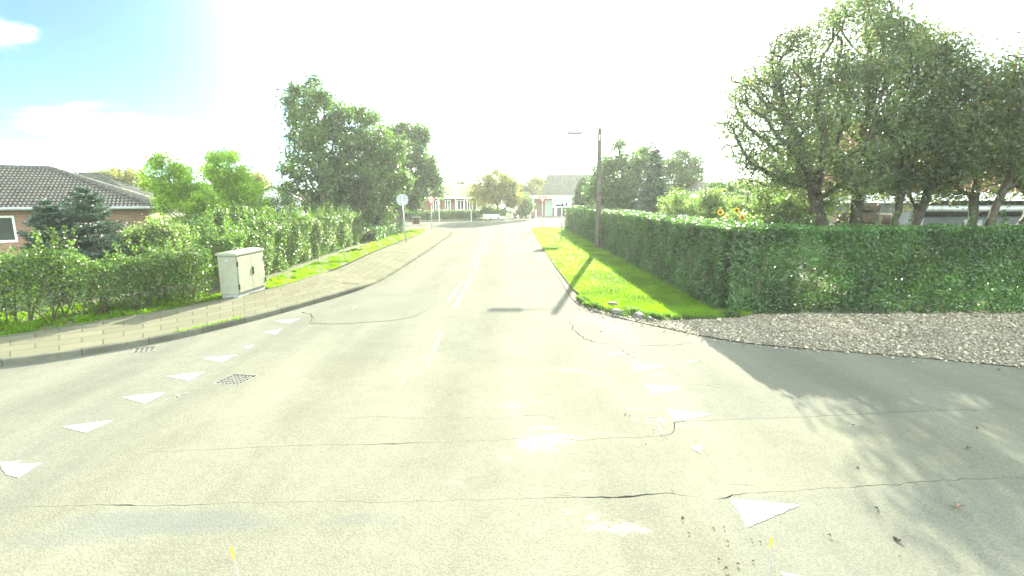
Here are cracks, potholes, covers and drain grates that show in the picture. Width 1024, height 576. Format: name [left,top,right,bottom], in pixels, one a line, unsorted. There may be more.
drain grate [130,346,157,354]
crack [569,319,703,359]
drain grate [212,373,259,386]
crack [720,477,1018,499]
crack [36,488,694,507]
